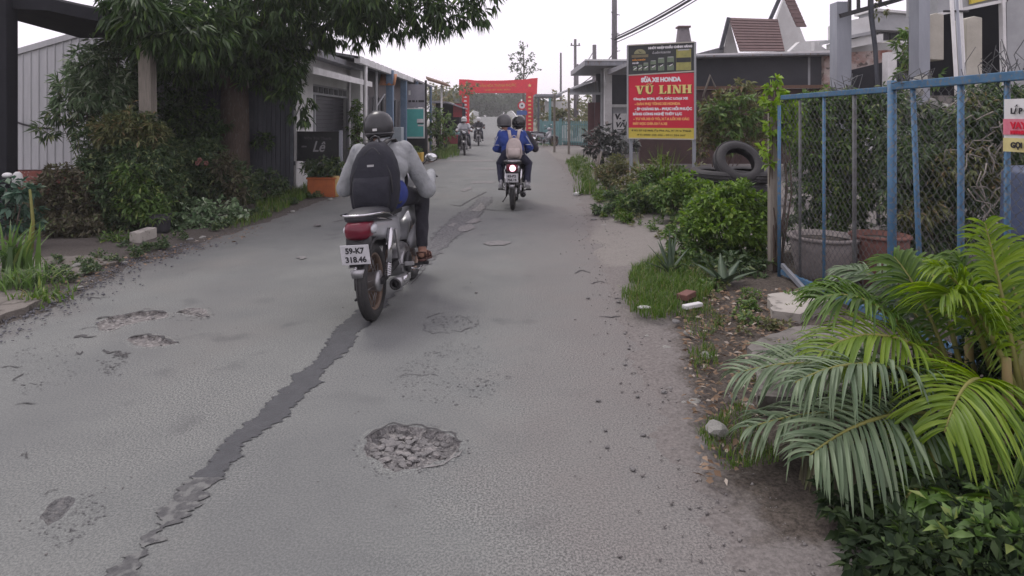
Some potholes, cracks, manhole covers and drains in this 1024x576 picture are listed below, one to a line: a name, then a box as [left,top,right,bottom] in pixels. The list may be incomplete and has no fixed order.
pothole [122,334,182,350]
pothole [355,422,468,478]
pothole [173,307,213,319]
pothole [90,309,174,333]
